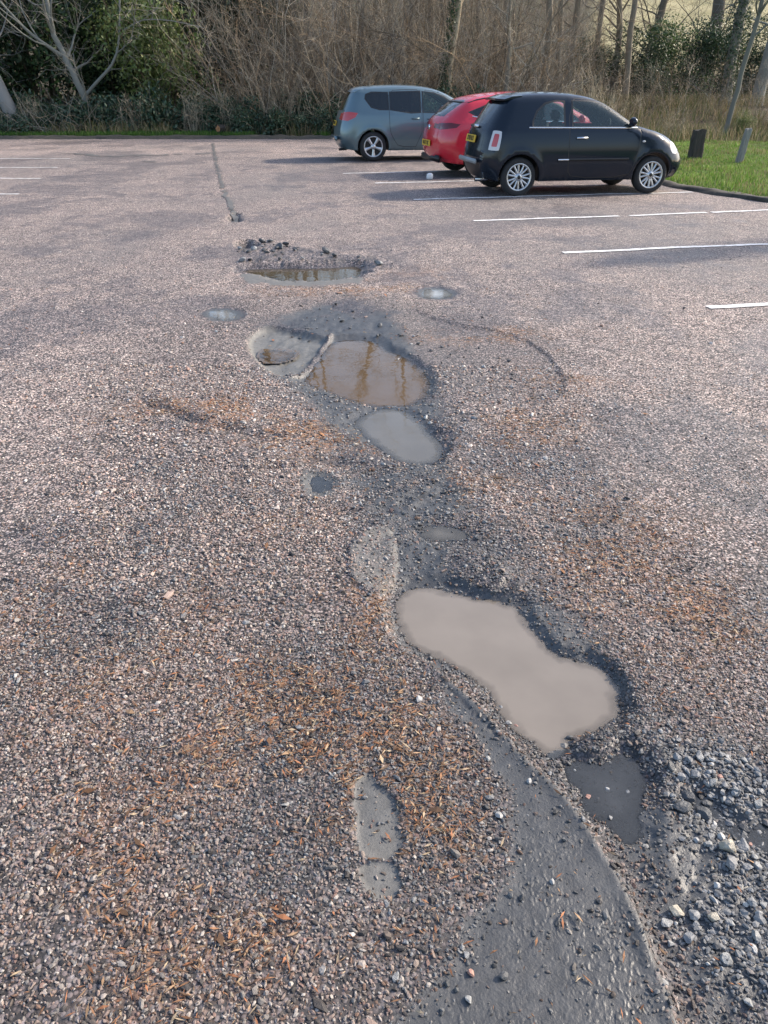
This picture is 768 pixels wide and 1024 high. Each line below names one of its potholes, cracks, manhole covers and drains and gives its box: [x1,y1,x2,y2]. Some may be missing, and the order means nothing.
pothole [226,258,375,282]
pothole [376,571,646,778]
pothole [340,406,459,467]
pothole [300,472,336,496]
pothole [243,324,330,379]
pothole [417,520,473,546]
pothole [556,745,659,856]
pothole [292,310,443,412]
pothole [414,286,458,300]
pothole [202,308,244,321]
